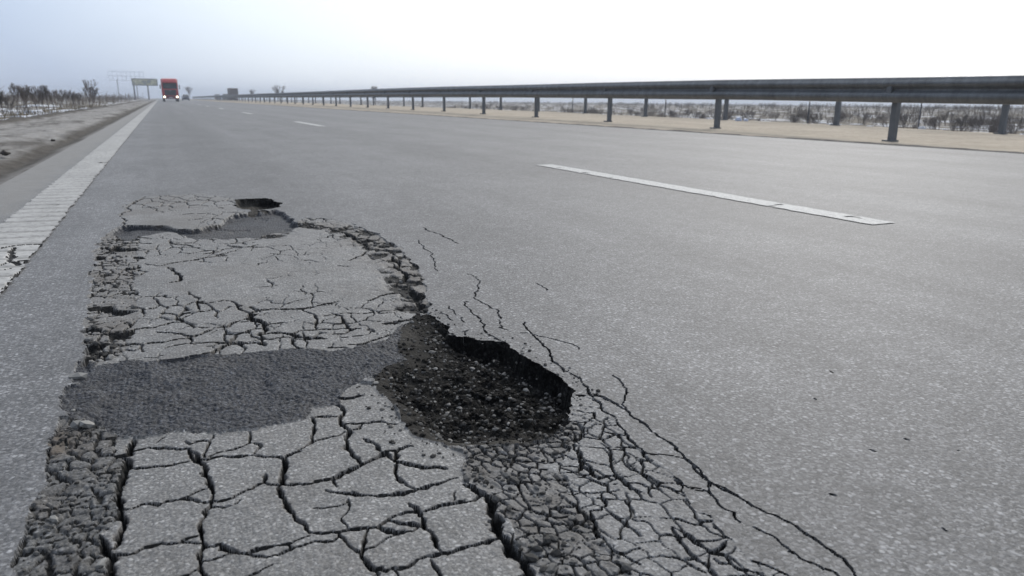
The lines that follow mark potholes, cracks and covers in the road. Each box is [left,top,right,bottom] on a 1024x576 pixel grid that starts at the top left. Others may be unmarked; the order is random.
crack [11,194,857,576]
pothole [375,313,576,447]
pothole [234,198,282,220]
